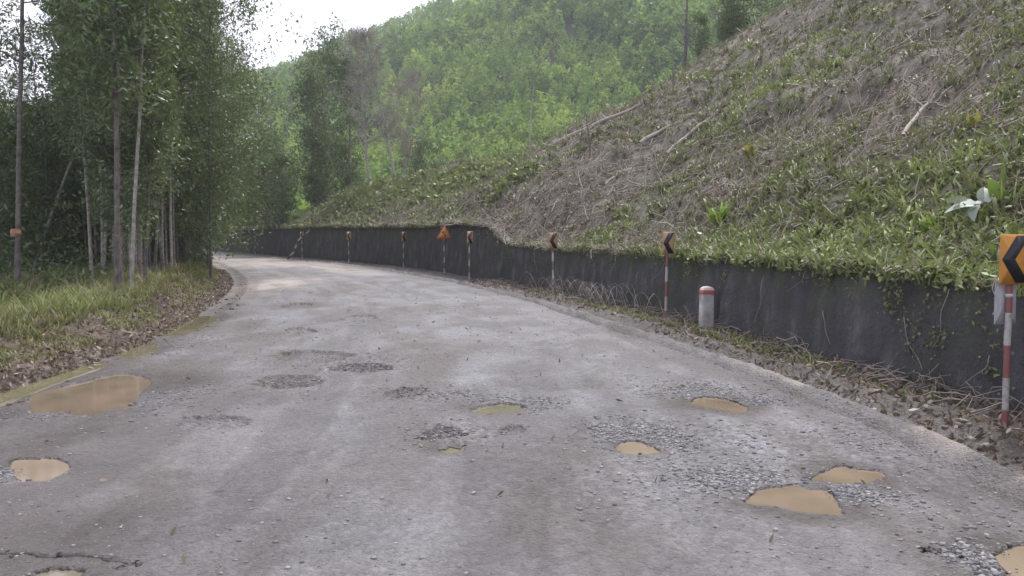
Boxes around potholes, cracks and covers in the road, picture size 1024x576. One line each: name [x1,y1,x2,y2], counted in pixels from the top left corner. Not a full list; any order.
pothole [402,422,481,450]
pothole [0,453,86,487]
pothole [487,422,539,438]
pothole [459,400,537,417]
pothole [976,537,1024,576]
pothole [603,436,674,459]
pothole [12,561,105,576]
pothole [424,438,478,457]
pothole [238,373,335,391]
pothole [794,462,900,491]
pothole [14,371,161,419]
pothole [318,362,403,376]
